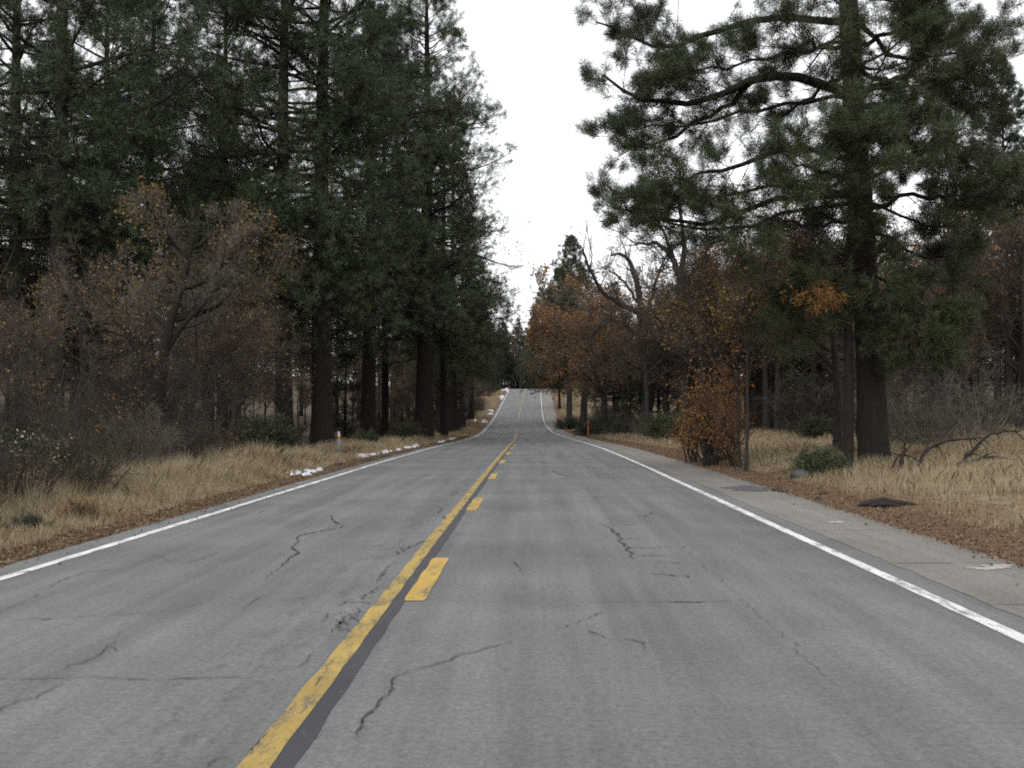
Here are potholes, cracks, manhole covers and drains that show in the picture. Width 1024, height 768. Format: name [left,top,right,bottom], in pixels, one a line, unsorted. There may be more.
crack [397,512,838,685]
crack [0,540,424,754]
crack [263,515,344,579]
crack [355,641,511,735]
